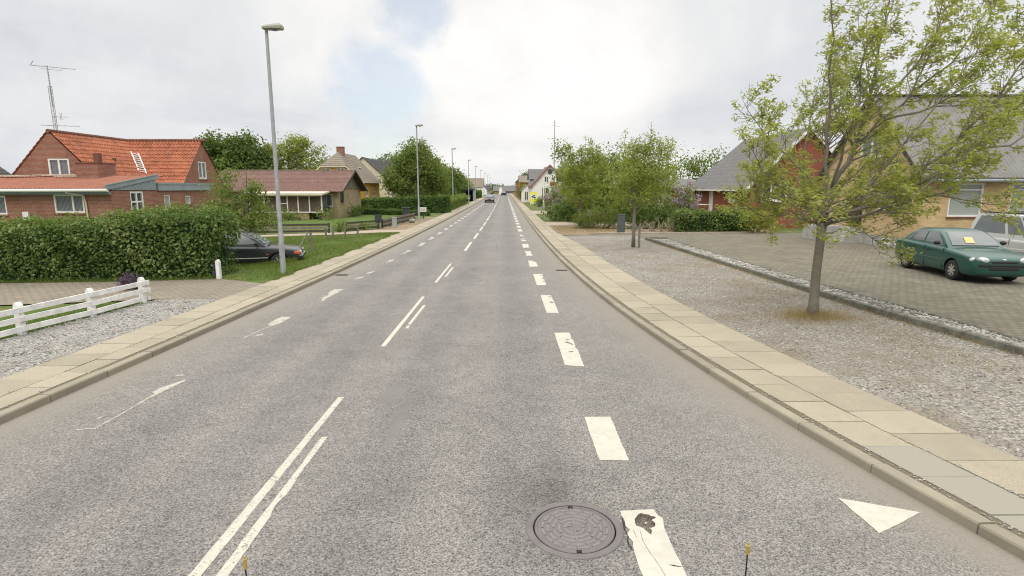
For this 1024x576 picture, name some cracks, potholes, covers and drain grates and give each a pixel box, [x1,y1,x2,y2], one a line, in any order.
pothole [635,513,656,534]
manhole cover [526,502,624,560]
